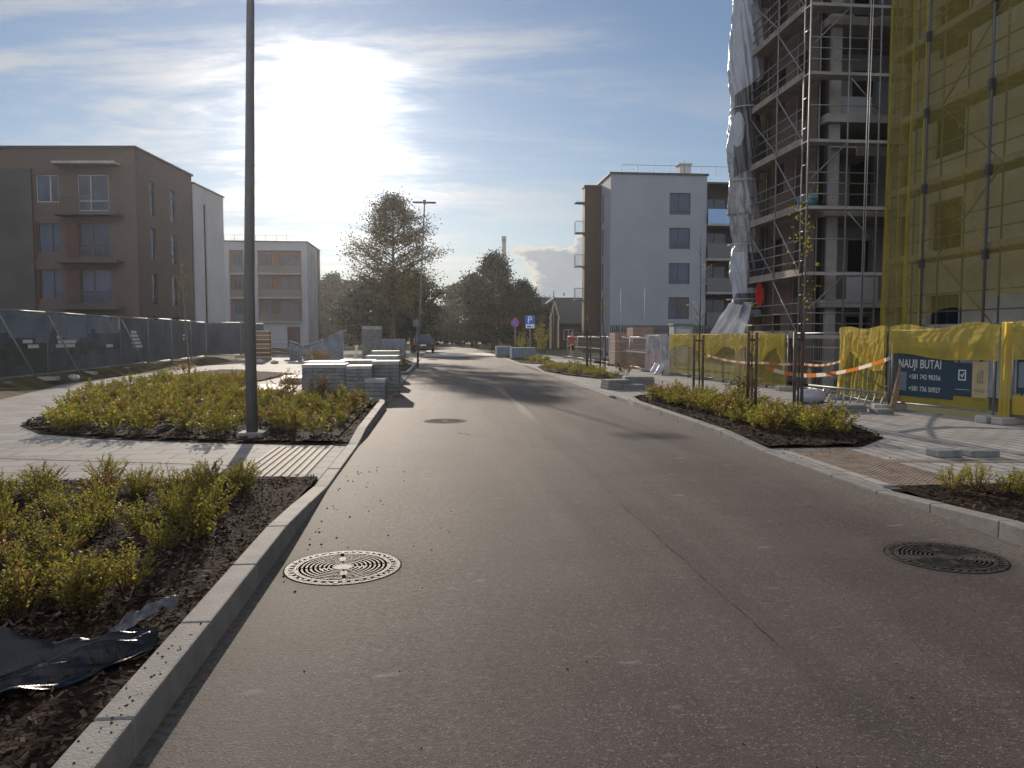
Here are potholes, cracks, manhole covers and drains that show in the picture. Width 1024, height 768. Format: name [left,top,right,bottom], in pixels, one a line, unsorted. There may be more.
manhole cover [283,550,402,586]
manhole cover [883,542,1011,574]
crack [623,506,774,642]
